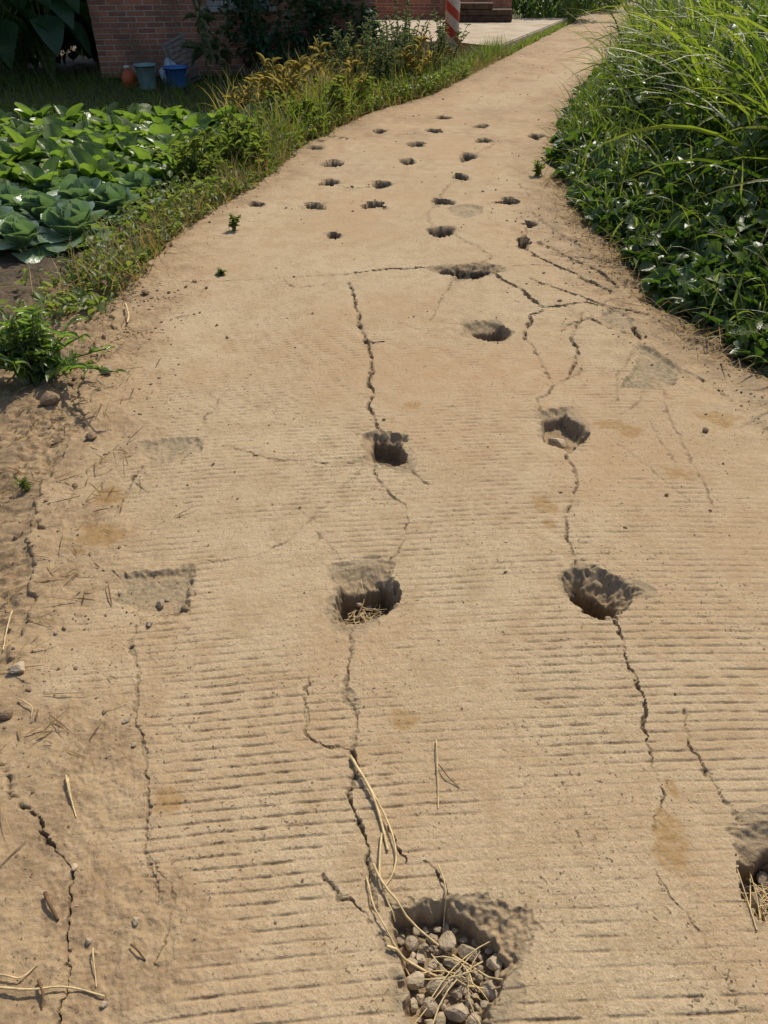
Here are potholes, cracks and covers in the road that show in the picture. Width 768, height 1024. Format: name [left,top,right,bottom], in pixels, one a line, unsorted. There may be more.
crack [29,811,75,1024]
crack [562,453,581,564]
crack [612,615,667,831]
pothole [555,558,657,623]
crack [687,732,739,819]
crack [127,617,177,908]
pothole [723,804,768,937]
pothole [321,554,402,641]
